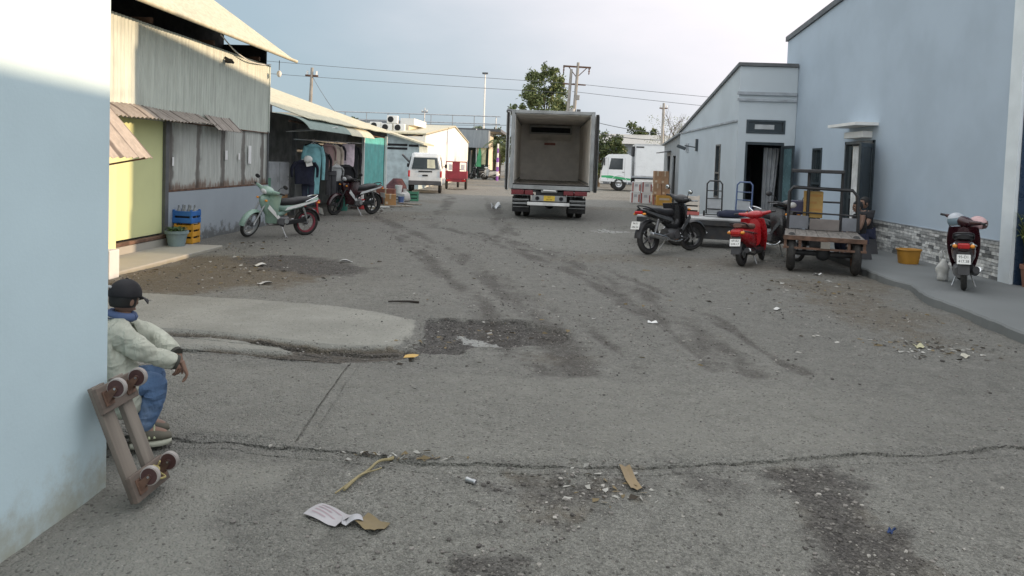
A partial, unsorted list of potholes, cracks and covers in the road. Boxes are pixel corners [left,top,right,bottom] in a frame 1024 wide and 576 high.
pothole [405,317,580,362]
crack [106,430,1024,476]
